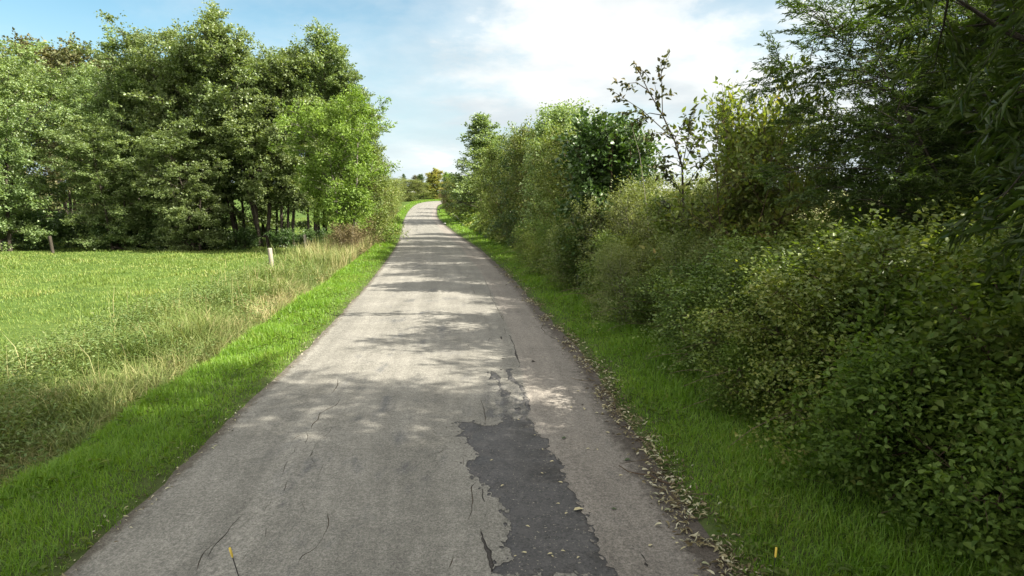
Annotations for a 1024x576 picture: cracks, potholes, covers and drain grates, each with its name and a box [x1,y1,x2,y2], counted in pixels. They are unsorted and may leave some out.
crack [465,271,520,422]
crack [196,380,339,572]
crack [468,484,494,572]
